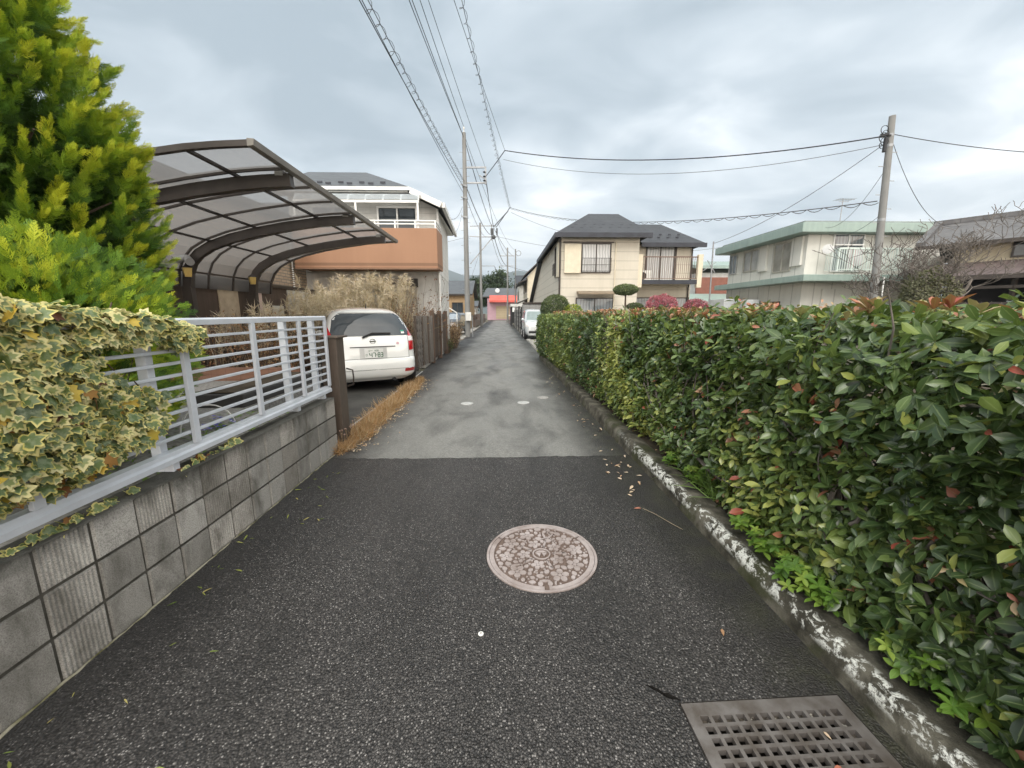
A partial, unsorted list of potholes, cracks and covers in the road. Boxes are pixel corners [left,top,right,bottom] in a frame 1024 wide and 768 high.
manhole cover [487,524,597,593]
crack [644,684,681,701]
drain grate [679,694,904,768]
